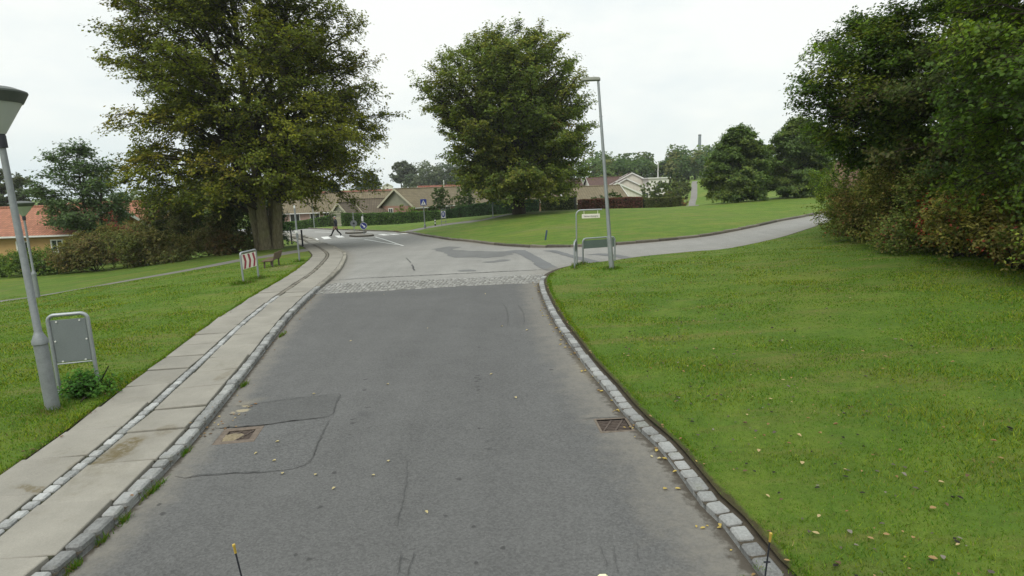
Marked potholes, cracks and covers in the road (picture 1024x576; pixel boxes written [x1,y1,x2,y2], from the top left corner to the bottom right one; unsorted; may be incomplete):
crack [395,460,407,528]
drain grate [594,417,635,433]
drain grate [212,426,264,445]
